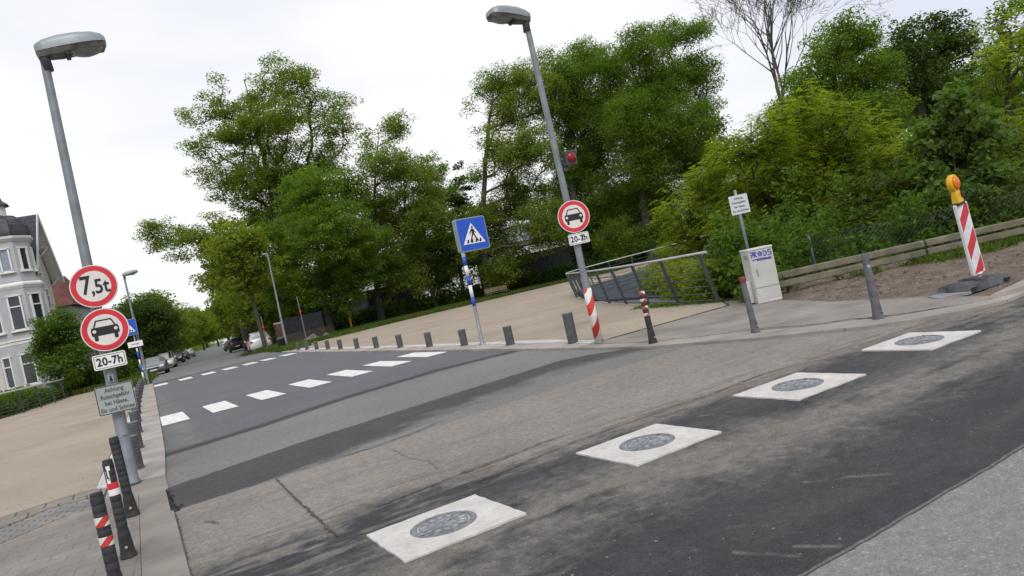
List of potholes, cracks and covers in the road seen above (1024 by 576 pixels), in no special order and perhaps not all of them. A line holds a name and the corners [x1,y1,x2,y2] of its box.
crack [250,363,798,507]
manhole cover [366,494,527,563]
manhole cover [861,330,981,351]
manhole cover [576,424,722,467]
manhole cover [733,372,866,401]
